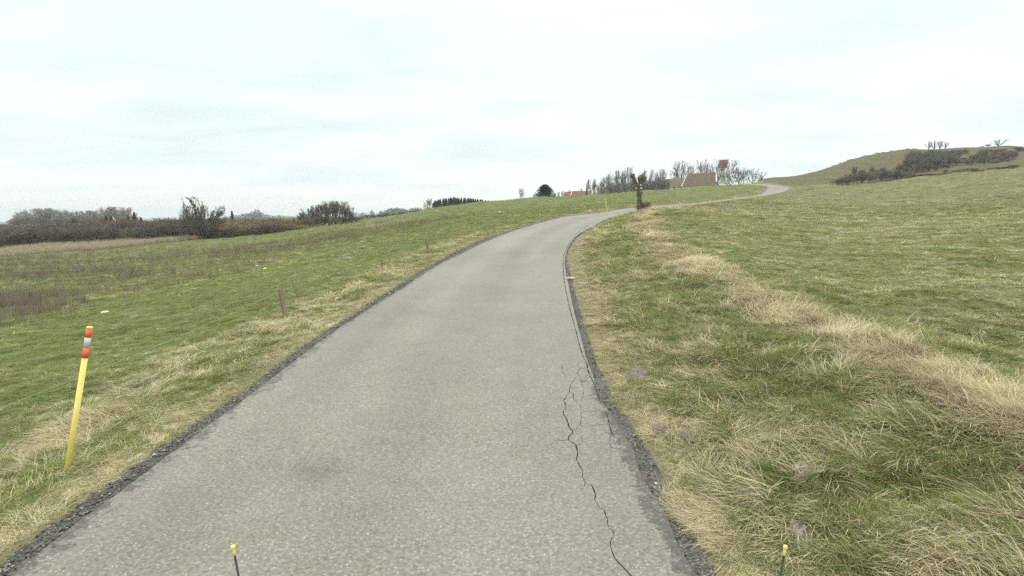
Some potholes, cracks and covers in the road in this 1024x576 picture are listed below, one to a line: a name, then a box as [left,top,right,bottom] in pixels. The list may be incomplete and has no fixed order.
crack [561,224,632,576]
